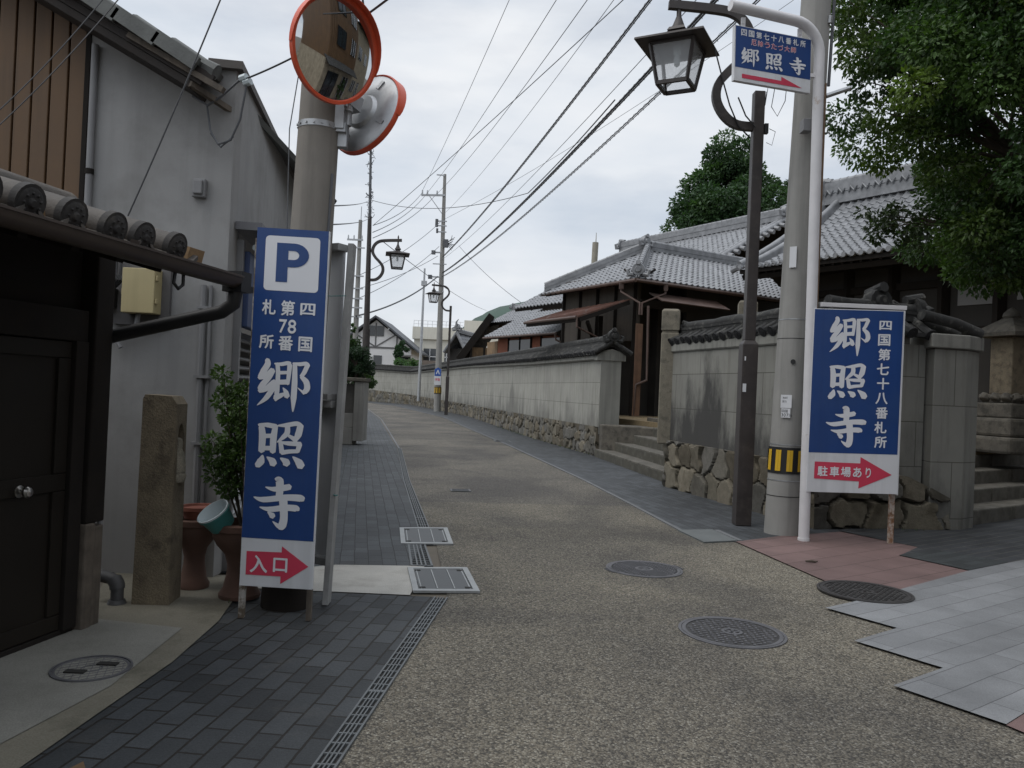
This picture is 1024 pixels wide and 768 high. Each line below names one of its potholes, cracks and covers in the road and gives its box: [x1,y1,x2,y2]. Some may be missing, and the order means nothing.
manhole cover [604,560,683,578]
manhole cover [48,655,133,683]
manhole cover [816,580,915,604]
manhole cover [678,616,788,650]
